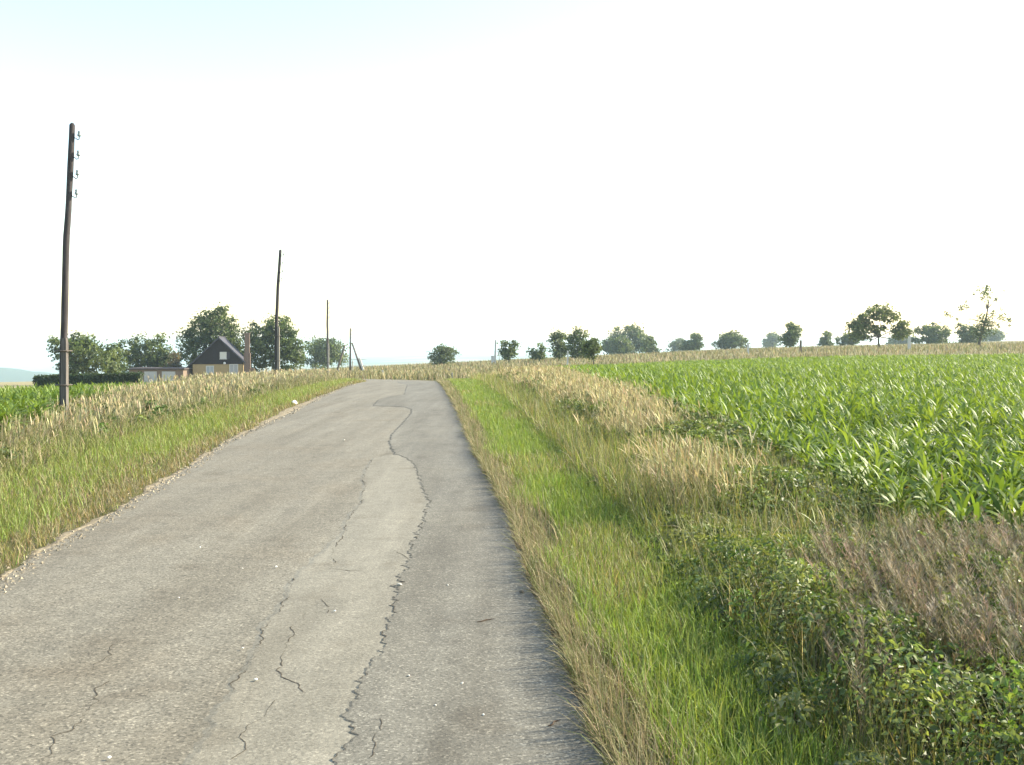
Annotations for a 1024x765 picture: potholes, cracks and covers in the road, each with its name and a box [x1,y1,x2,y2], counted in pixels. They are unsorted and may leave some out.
crack [231,457,377,692]
crack [332,411,432,761]
crack [39,640,117,761]
